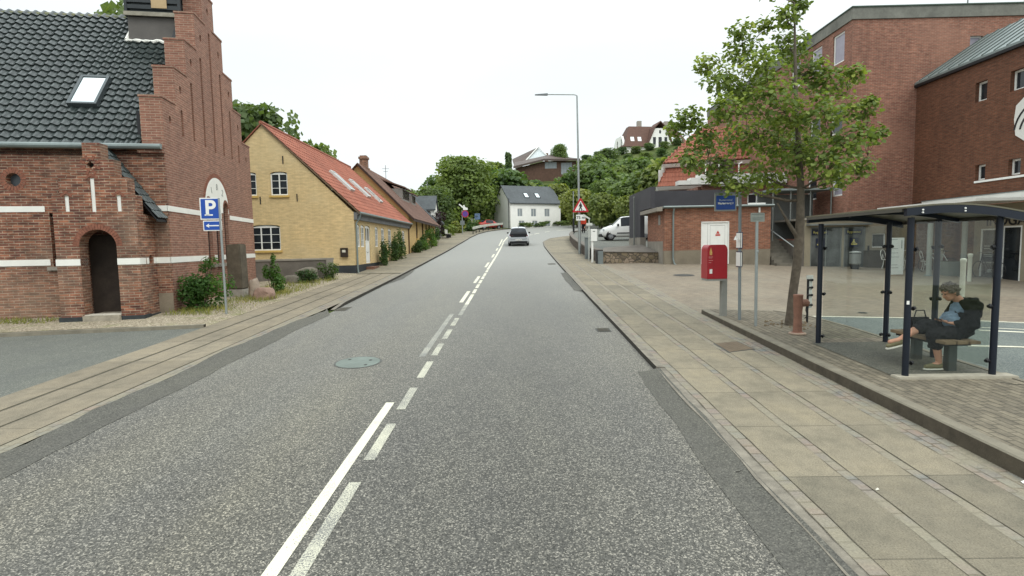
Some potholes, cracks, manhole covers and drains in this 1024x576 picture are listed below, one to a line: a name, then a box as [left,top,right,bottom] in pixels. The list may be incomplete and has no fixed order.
manhole cover [713,341,754,352]
manhole cover [334,356,382,368]
